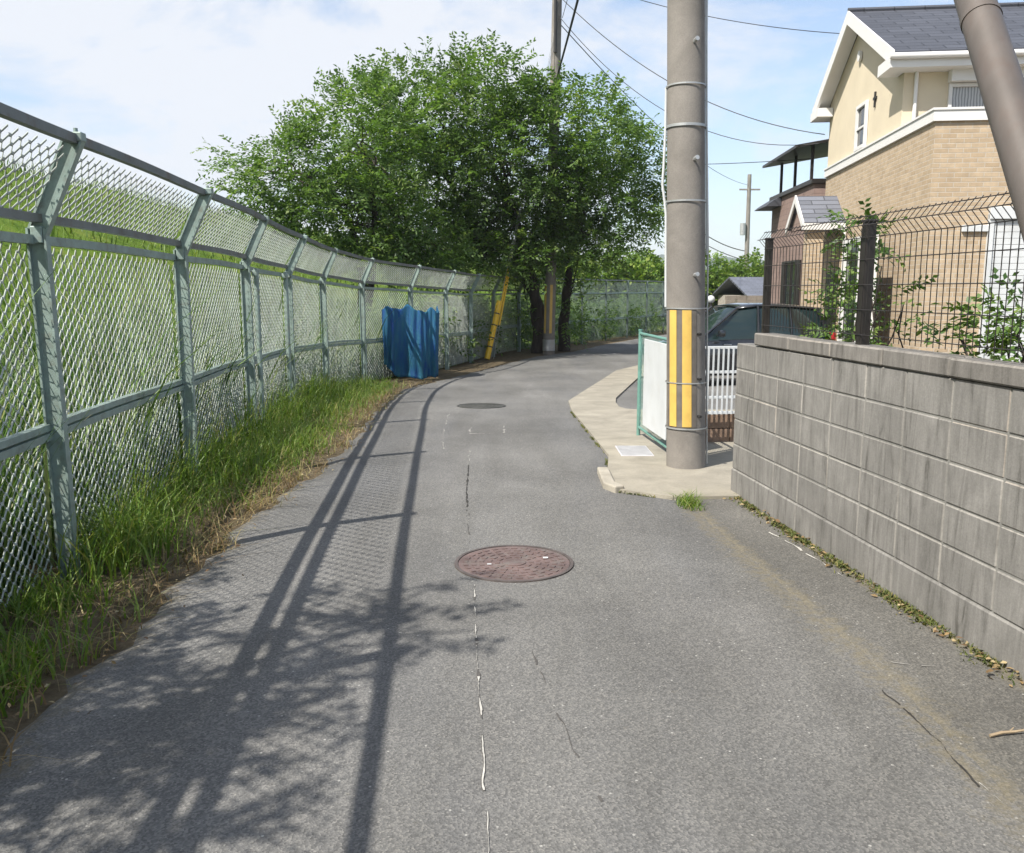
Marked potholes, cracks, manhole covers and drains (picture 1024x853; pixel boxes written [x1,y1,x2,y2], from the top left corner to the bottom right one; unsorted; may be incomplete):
manhole cover [454,545,574,583]
crack [532,651,603,801]
crack [882,690,1005,805]
